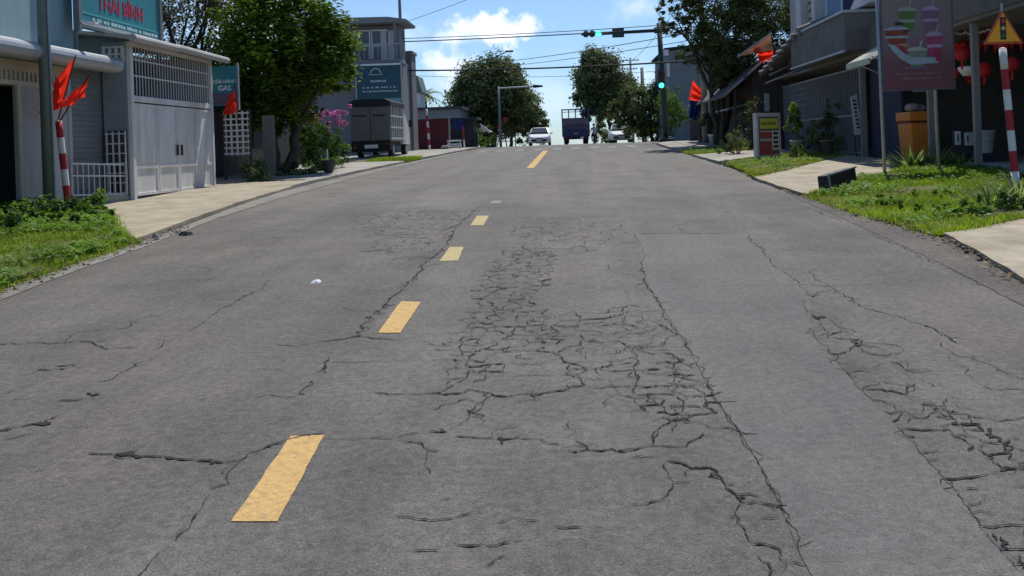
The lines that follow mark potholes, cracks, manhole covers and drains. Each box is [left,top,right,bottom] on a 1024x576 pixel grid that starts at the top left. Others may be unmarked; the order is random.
crack [90,433,323,576]
crack [794,272,1024,506]
crack [328,218,803,576]
crack [263,356,408,397]
crack [981,523,1024,568]
crack [0,287,264,440]
